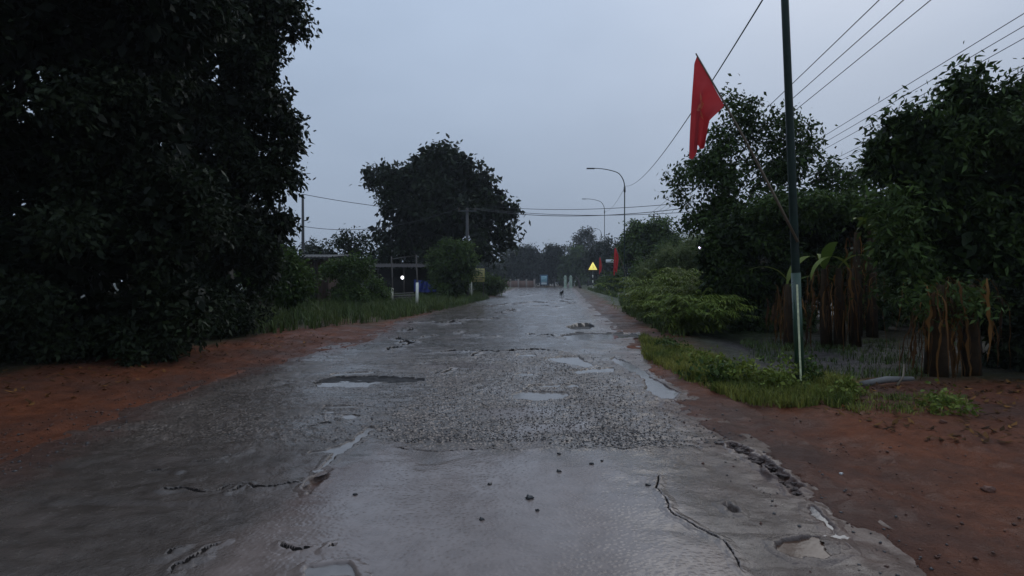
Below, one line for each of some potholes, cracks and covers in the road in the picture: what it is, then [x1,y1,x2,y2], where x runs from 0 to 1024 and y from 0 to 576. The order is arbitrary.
pothole [604,356,688,402]
crack [150,538,236,576]
pothole [715,439,822,503]
crack [139,449,310,497]
pothole [292,467,340,498]
crack [647,474,756,576]
pothole [537,354,604,368]
pothole [305,375,431,389]
pothole [502,389,577,403]
pothole [566,366,623,375]
pothole [797,501,862,557]
pothole [762,531,851,568]
